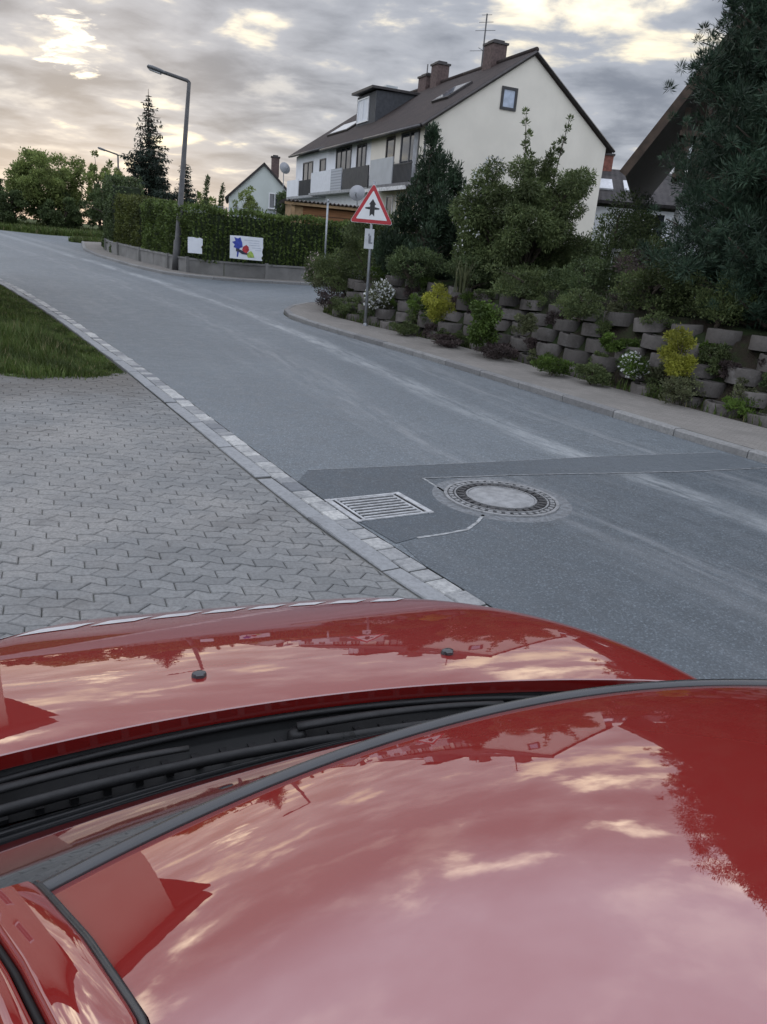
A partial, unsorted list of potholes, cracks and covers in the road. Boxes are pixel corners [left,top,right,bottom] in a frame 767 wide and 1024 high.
manhole cover [432,478,572,523]
drain grate [324,492,434,522]
